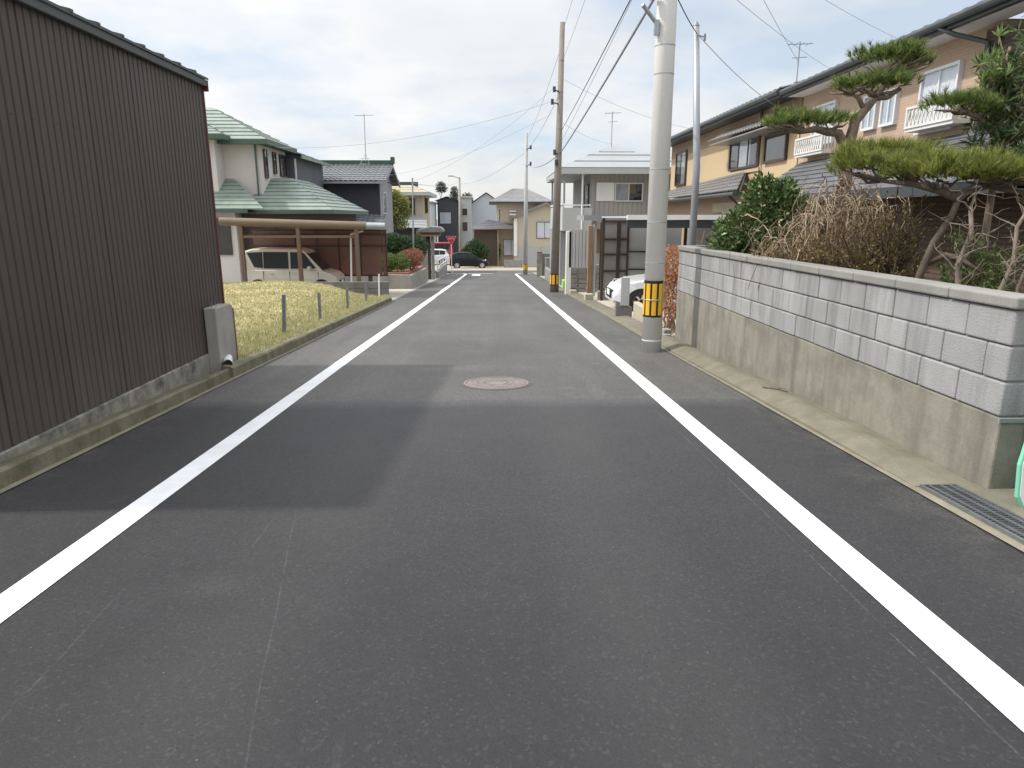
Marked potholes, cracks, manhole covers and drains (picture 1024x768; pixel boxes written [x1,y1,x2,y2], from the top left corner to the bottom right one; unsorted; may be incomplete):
manhole cover [460,376,533,390]
drain grate [919,484,1024,545]
